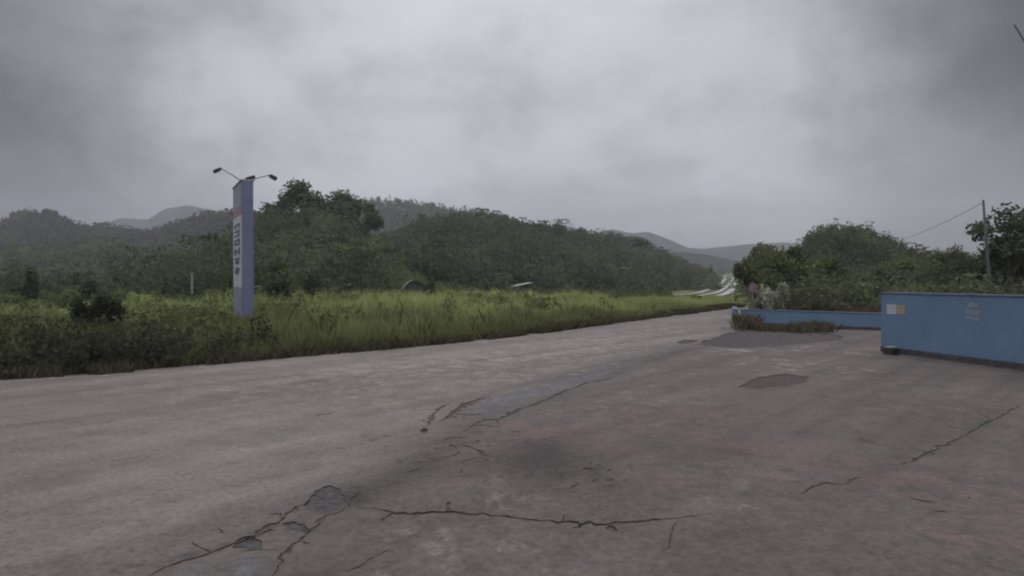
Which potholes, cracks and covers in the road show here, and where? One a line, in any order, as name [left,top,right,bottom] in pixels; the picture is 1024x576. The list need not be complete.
crack [900,406,1018,465]
crack [801,477,858,494]
crack [407,371,615,478]
pothole [304,485,346,514]
crack [149,490,705,576]
